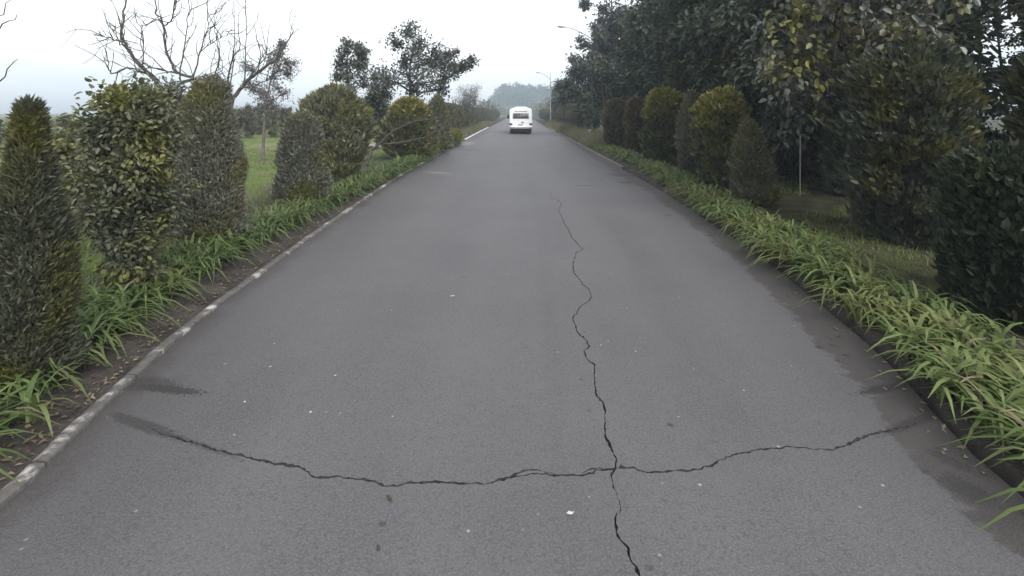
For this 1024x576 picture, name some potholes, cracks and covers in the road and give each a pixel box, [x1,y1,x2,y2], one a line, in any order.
crack [151,197,915,576]
